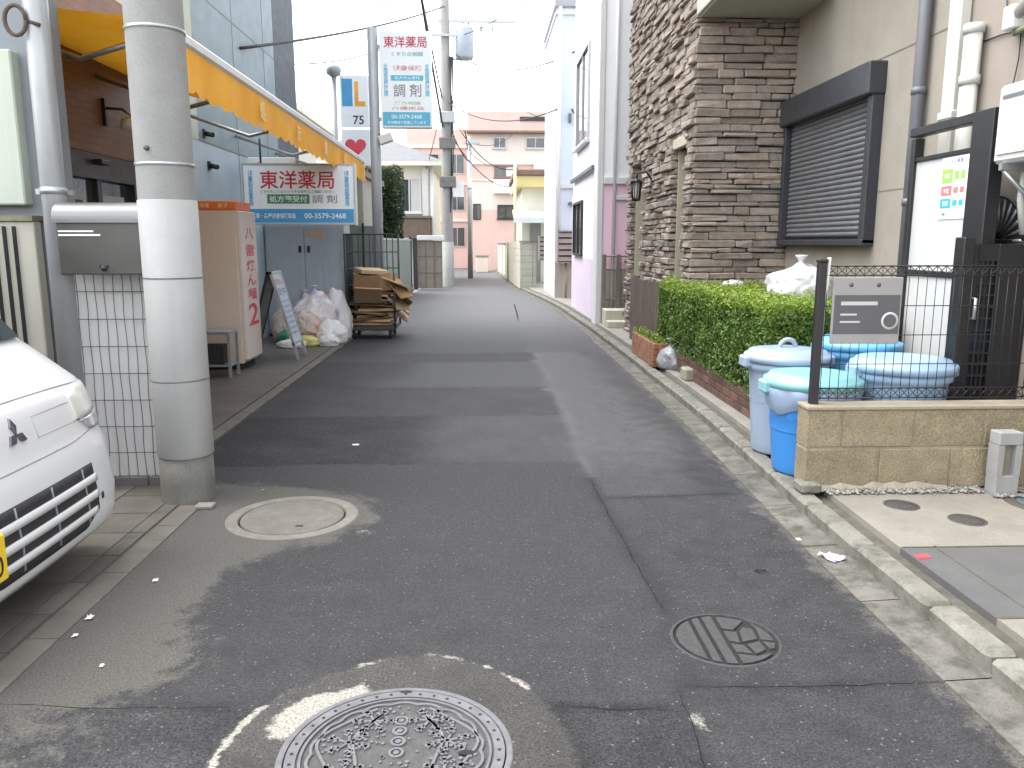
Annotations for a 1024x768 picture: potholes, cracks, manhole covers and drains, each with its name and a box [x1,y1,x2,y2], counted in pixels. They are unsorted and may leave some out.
manhole cover [670,614,782,667]
manhole cover [275,688,513,768]
crack [592,483,713,609]
manhole cover [225,496,358,540]
crack [560,682,939,768]
